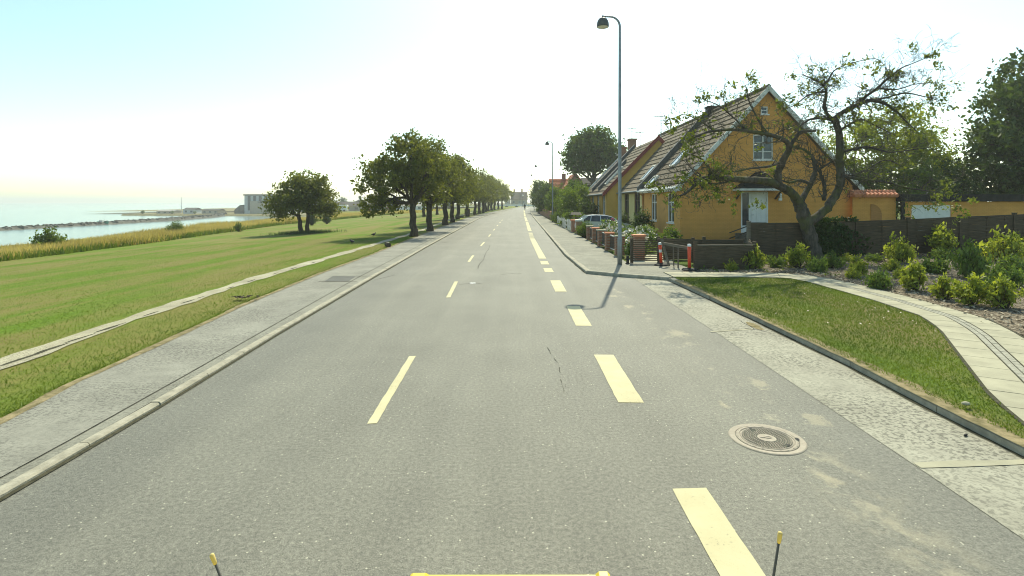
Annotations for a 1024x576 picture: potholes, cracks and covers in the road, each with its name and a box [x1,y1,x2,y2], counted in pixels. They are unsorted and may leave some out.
manhole cover [728,423,807,456]
